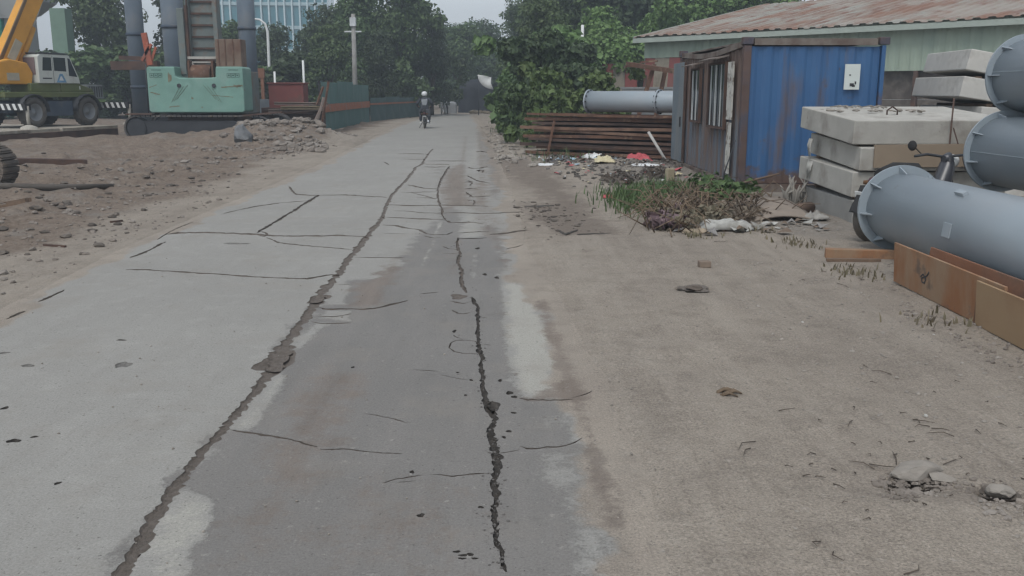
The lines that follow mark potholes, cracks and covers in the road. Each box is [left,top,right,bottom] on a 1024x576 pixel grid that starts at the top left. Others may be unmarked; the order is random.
crack [111,149,609,576]
